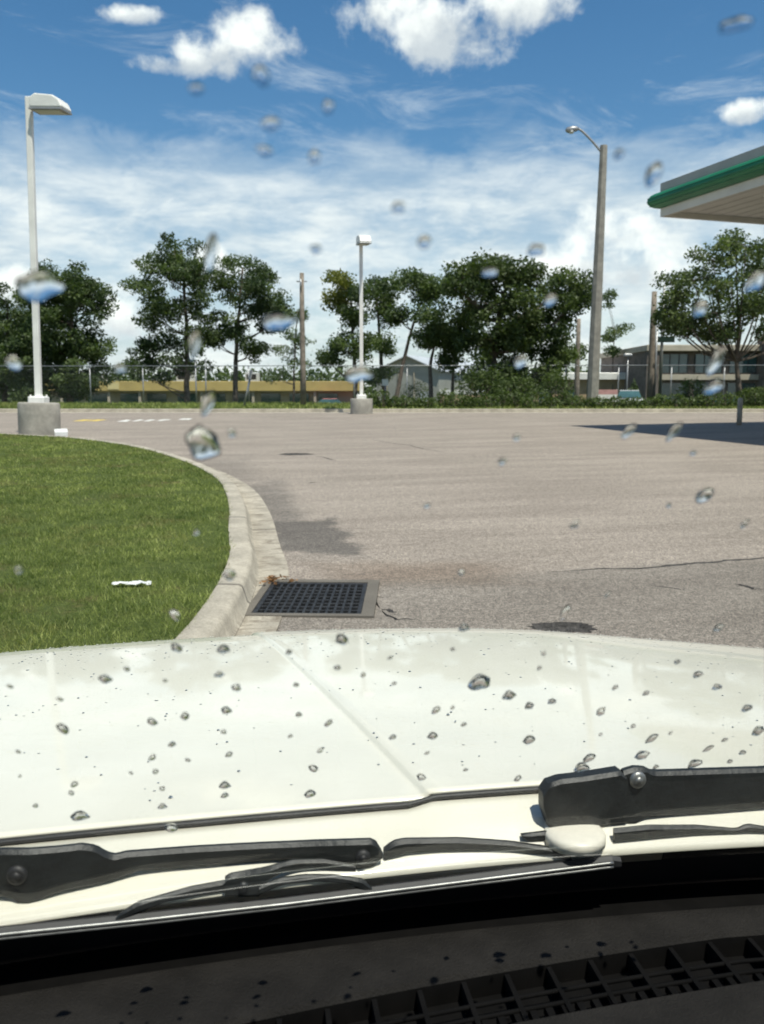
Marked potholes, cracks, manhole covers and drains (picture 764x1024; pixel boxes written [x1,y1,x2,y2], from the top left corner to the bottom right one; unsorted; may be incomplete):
drain grate [242,579,380,632]
crack [376,596,413,620]
pothole [527,622,598,633]
crack [559,557,764,590]
